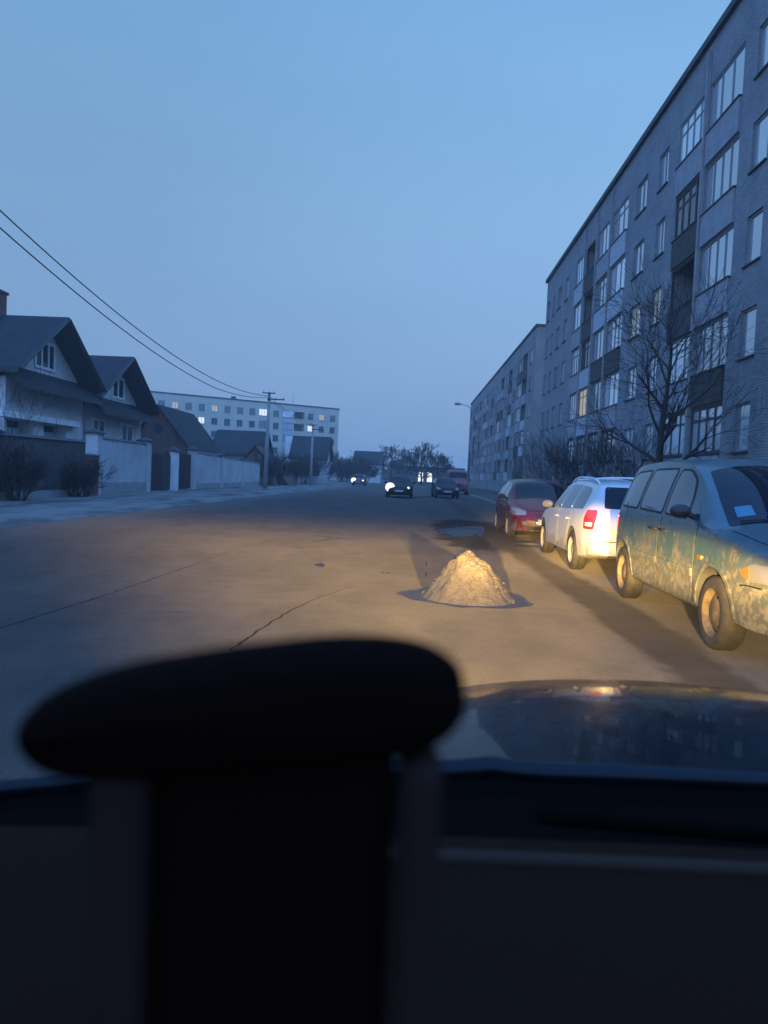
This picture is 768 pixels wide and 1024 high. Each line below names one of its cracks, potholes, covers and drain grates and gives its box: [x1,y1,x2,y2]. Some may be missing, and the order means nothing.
pothole [438,526,485,537]
crack [238,587,350,644]
crack [0,555,219,628]
